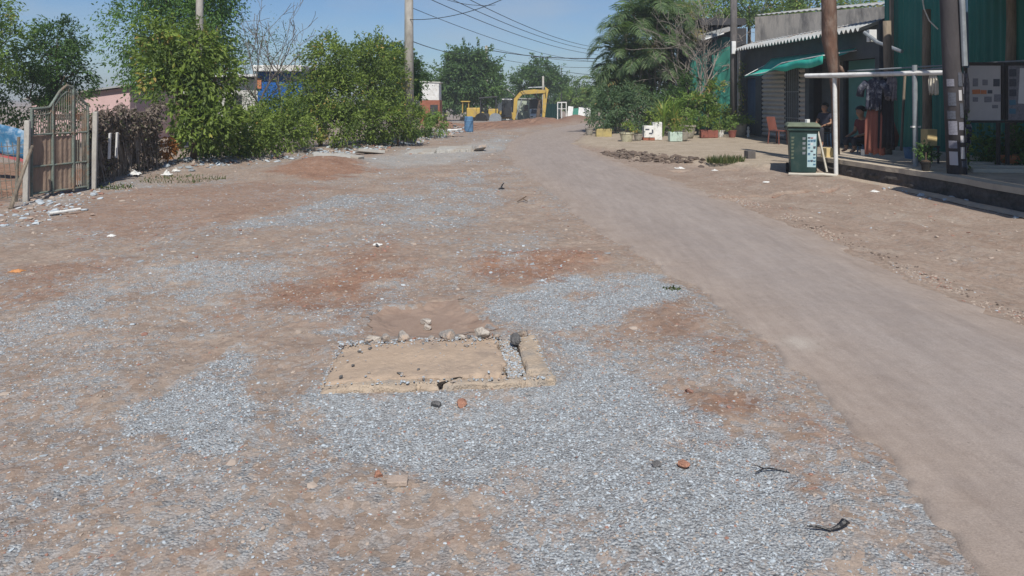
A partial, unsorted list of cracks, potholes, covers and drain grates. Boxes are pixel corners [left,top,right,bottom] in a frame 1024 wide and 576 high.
manhole cover [320,335,556,394]
pothole [361,295,499,336]
crack [437,377,462,387]
